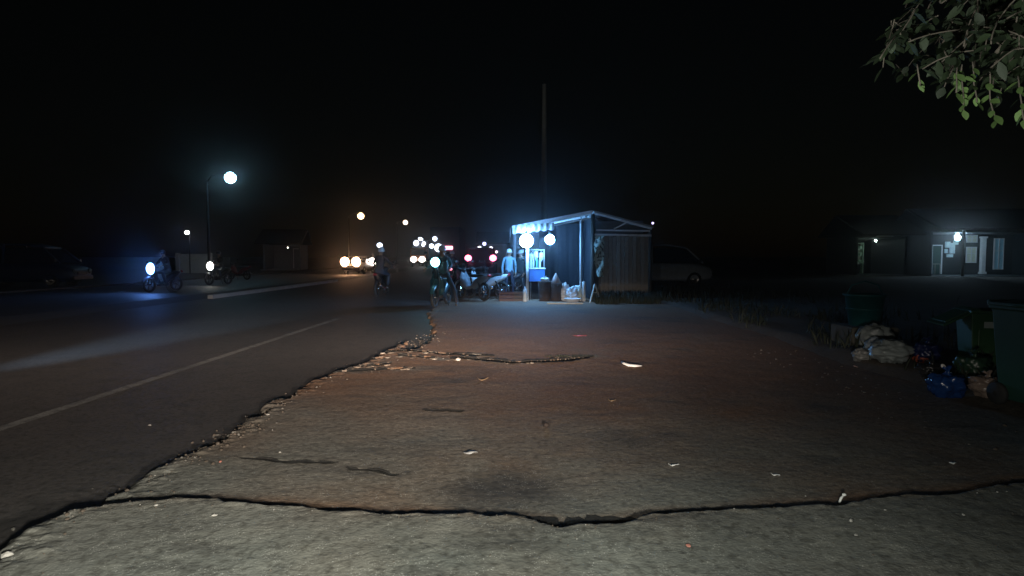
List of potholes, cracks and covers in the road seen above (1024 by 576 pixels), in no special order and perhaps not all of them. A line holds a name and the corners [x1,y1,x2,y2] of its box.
crack [335,349,593,373]
crack [234,456,399,476]
